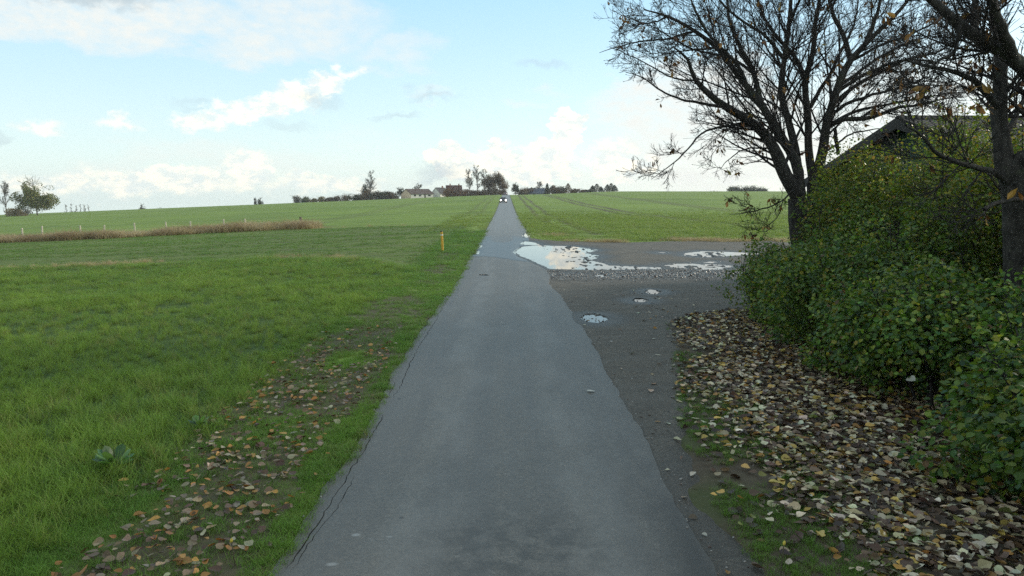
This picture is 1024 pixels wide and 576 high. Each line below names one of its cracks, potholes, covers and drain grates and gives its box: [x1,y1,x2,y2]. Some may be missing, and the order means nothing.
pothole [577,313,611,324]
crack [287,416,383,572]
crack [389,293,452,396]
